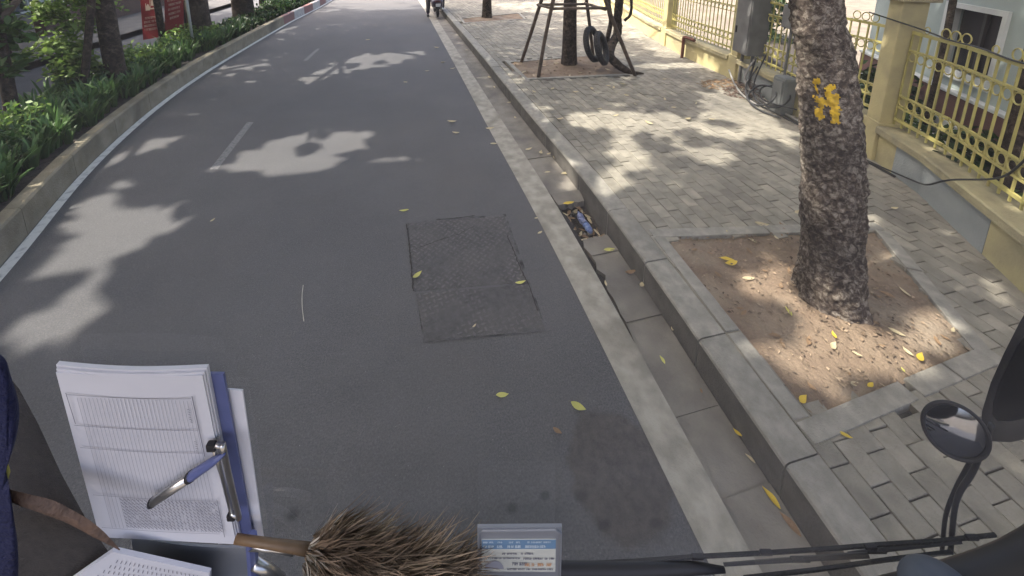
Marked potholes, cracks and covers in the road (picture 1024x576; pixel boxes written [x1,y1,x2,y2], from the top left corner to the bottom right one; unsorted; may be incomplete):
manhole cover [406,214,547,343]
